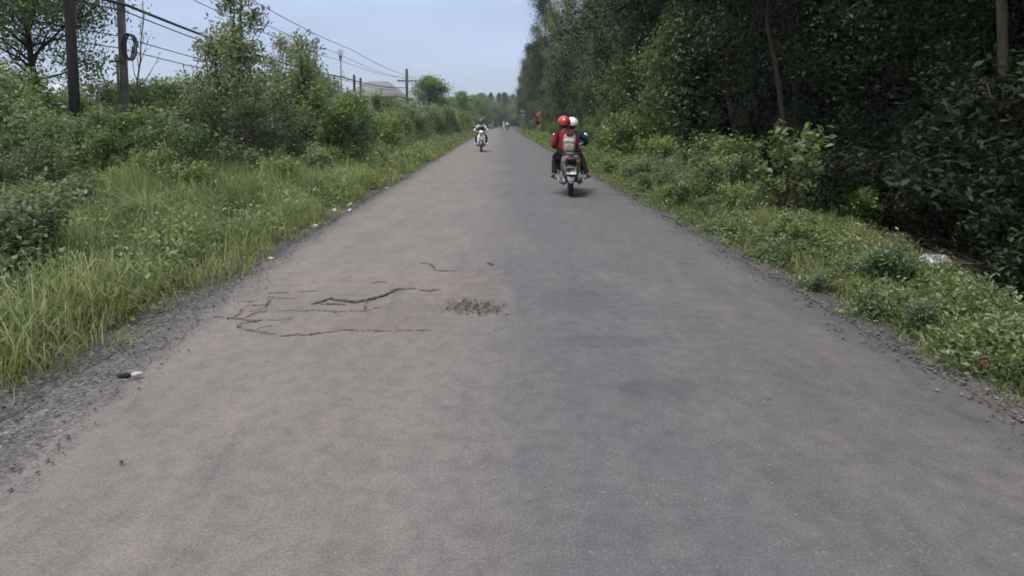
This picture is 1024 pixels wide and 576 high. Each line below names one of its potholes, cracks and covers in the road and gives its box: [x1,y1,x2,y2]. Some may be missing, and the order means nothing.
crack [214,263,454,337]
pothole [436,297,515,317]
